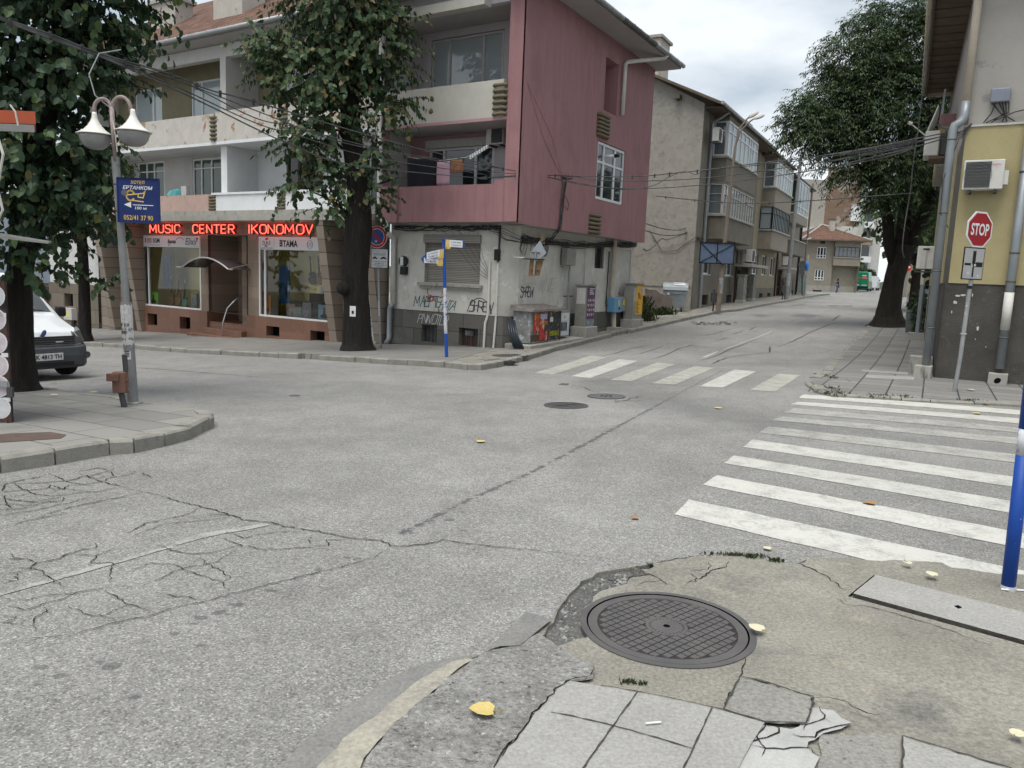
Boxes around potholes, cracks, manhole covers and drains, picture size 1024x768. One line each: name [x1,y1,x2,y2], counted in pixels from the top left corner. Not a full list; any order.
crack [0,508,387,644]
manhole cover [580,591,757,669]
crack [1,468,150,526]
pothole [545,571,645,646]
crack [627,554,992,646]
